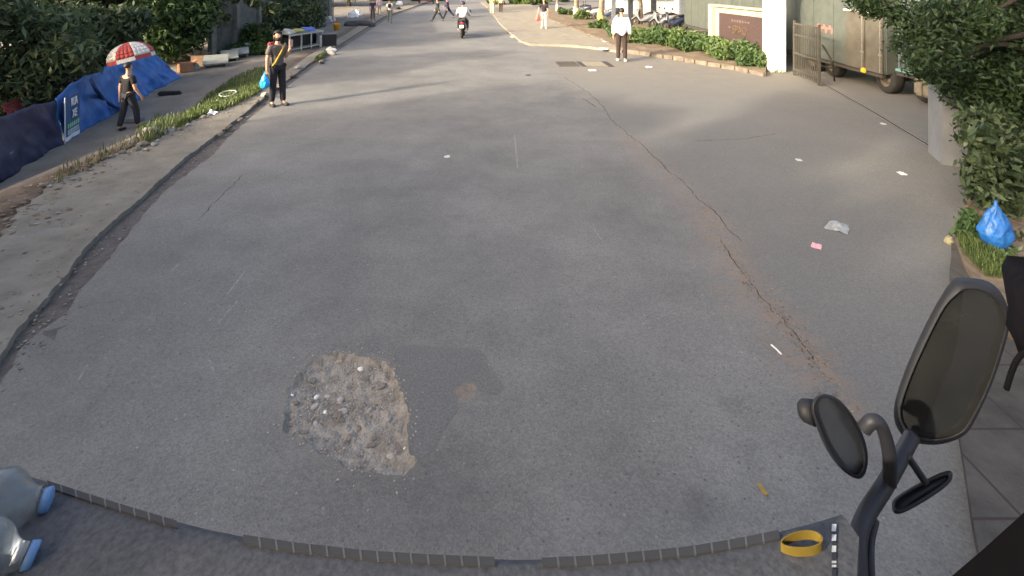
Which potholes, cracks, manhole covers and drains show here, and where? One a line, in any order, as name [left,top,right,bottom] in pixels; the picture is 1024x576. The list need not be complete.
crack [567,79,815,364]
pothole [264,343,438,494]
